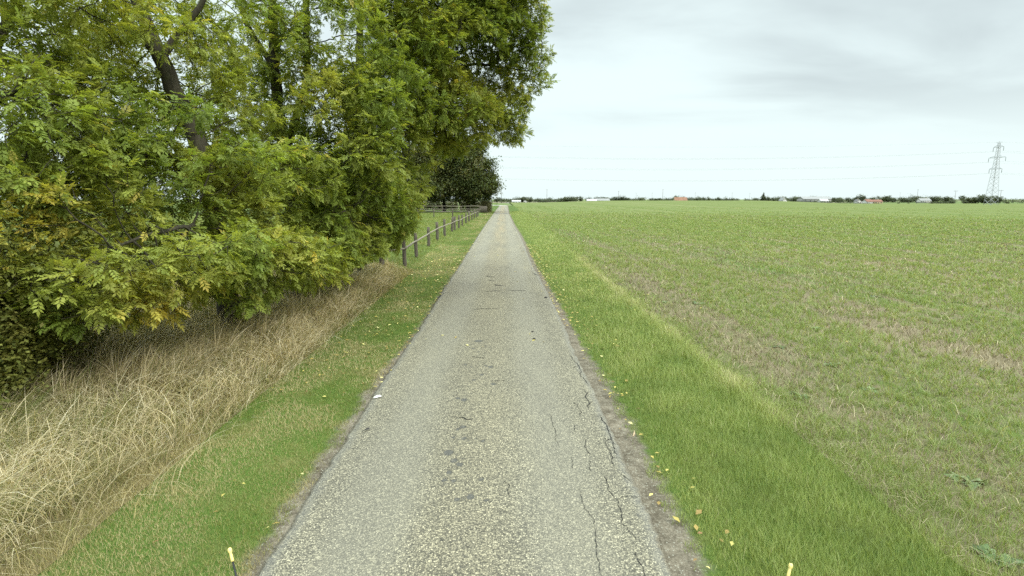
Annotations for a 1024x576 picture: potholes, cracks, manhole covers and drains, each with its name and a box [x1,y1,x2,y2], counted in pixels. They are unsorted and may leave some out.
crack [550,356,646,576]
